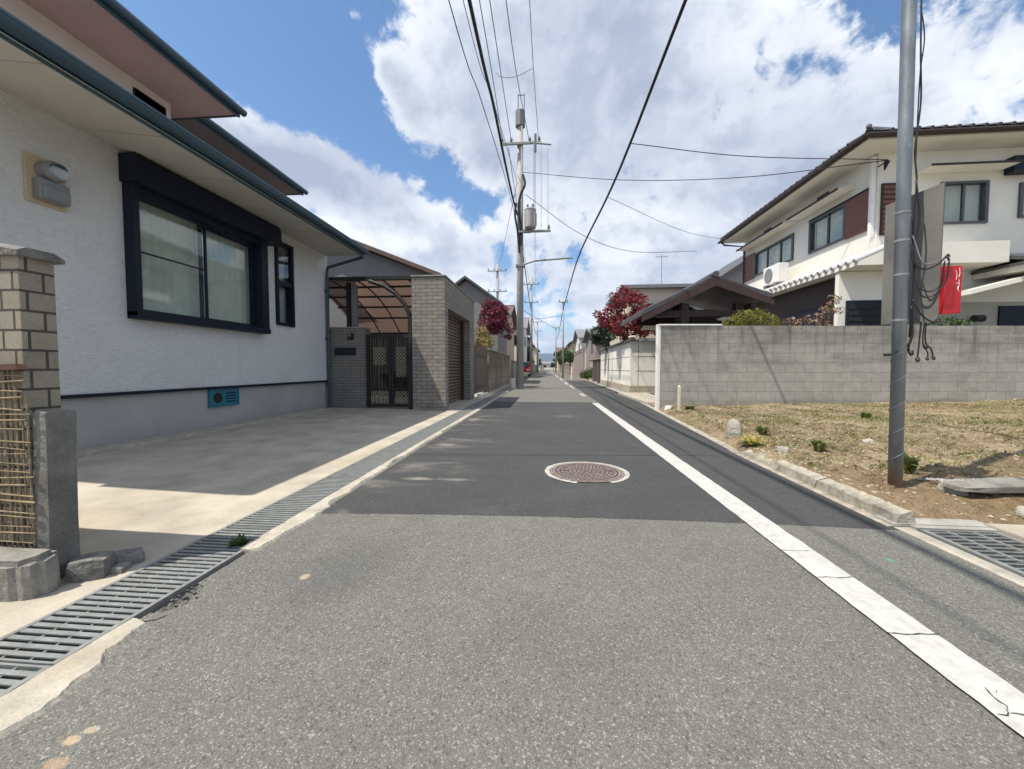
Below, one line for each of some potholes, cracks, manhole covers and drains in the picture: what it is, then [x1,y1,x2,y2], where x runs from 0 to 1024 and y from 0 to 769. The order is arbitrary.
drain grate [0,662,52,697]
manhole cover [545,462,630,483]
drain grate [227,477,358,528]
crack [986,689,1024,716]
drain grate [0,526,273,666]
drain grate [326,451,404,478]
drain grate [920,529,1024,577]
